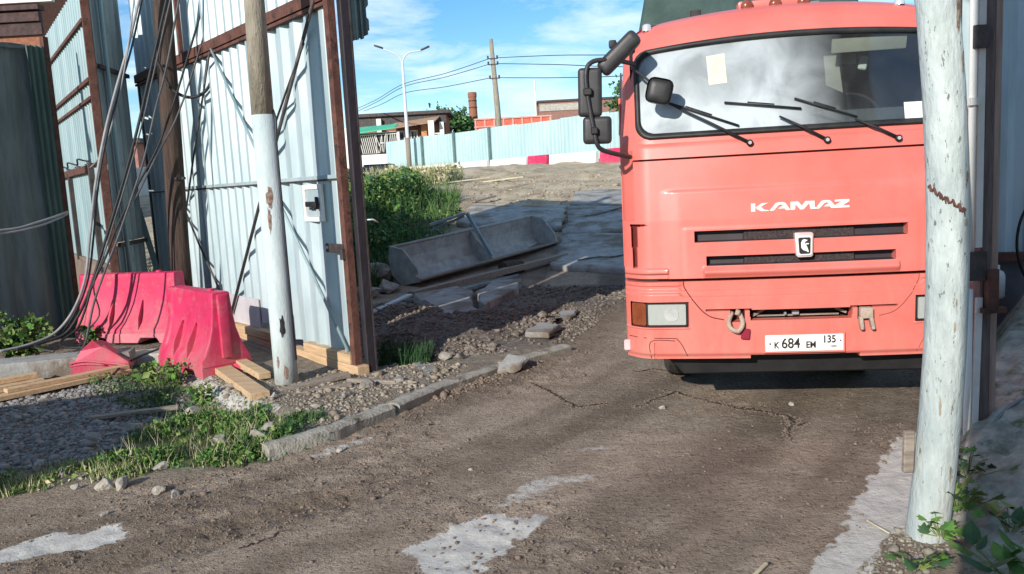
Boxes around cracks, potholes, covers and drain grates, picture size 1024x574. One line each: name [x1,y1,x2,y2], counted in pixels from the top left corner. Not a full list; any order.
crack [630,368,811,442]
